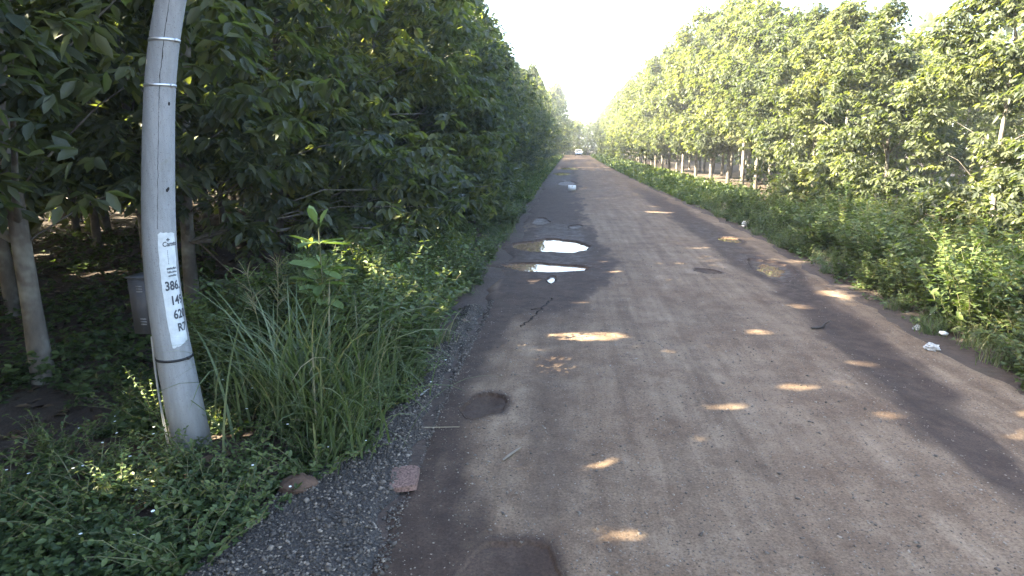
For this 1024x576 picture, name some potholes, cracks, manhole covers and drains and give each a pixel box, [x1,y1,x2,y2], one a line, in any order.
pothole [458,392,509,420]
pothole [499,262,594,273]
pothole [746,258,799,283]
pothole [509,238,593,253]
pothole [530,217,552,225]
crack [520,298,554,327]
